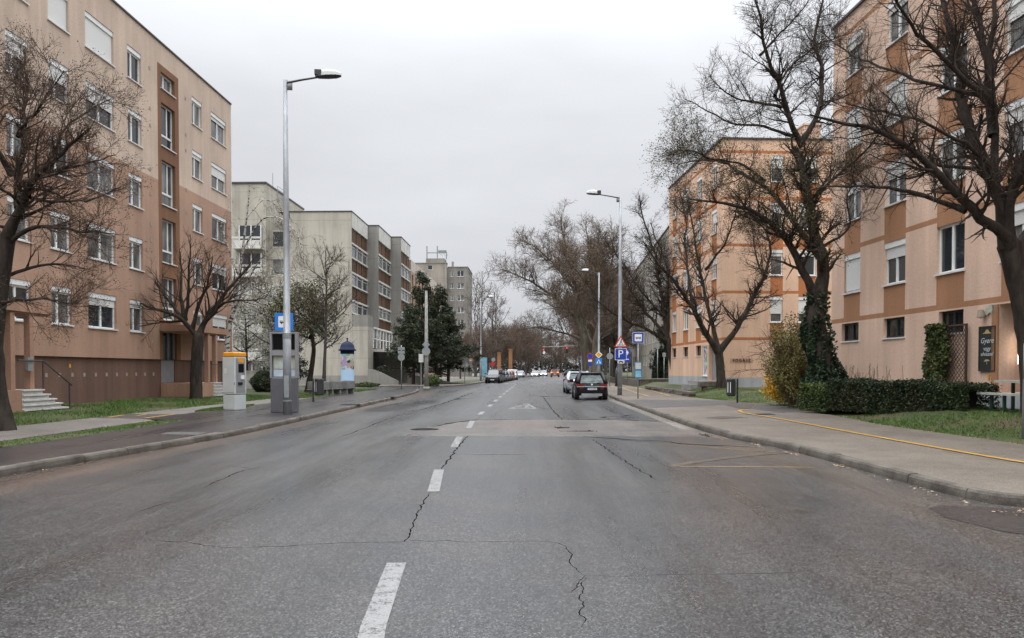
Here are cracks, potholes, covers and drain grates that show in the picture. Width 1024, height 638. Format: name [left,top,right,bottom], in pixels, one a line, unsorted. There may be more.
crack [157,493,786,624]
